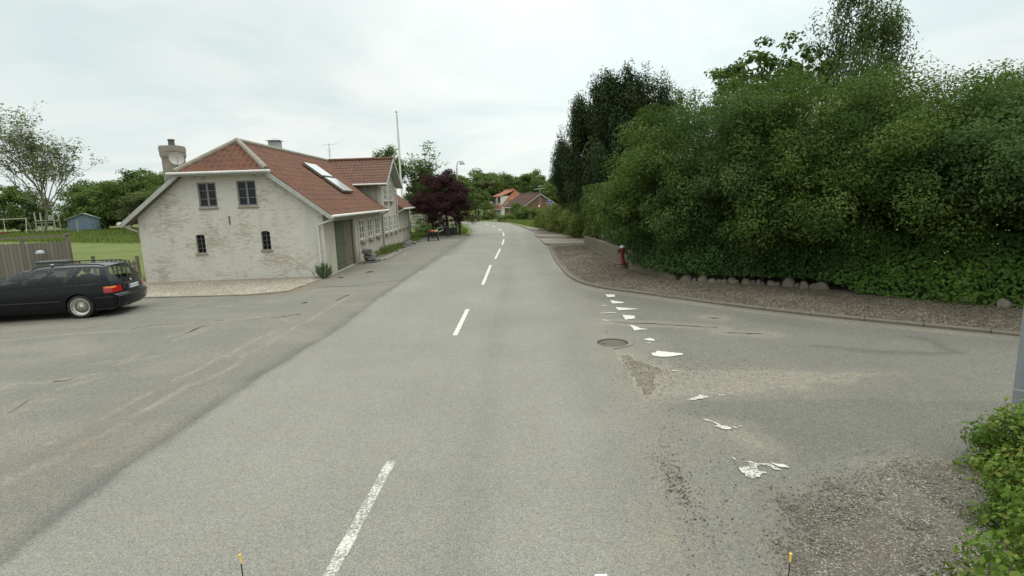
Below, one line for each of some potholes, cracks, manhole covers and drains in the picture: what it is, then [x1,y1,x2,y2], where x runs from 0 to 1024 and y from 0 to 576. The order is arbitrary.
manhole cover [596,338,629,349]
